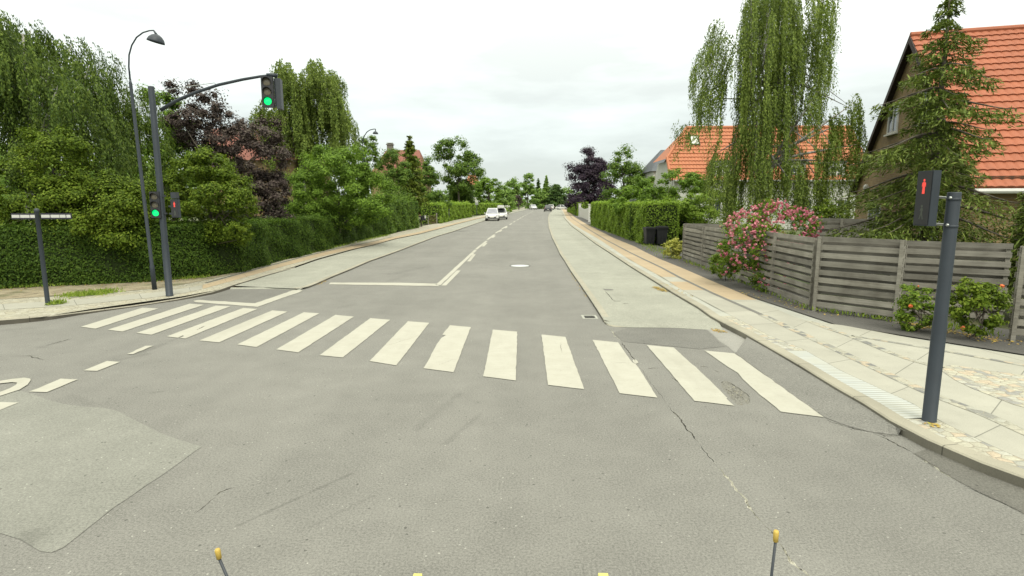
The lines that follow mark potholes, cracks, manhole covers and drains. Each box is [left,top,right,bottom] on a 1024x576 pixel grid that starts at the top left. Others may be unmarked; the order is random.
pothole [721,381,750,405]
crack [828,420,1020,512]
crack [612,331,810,576]
